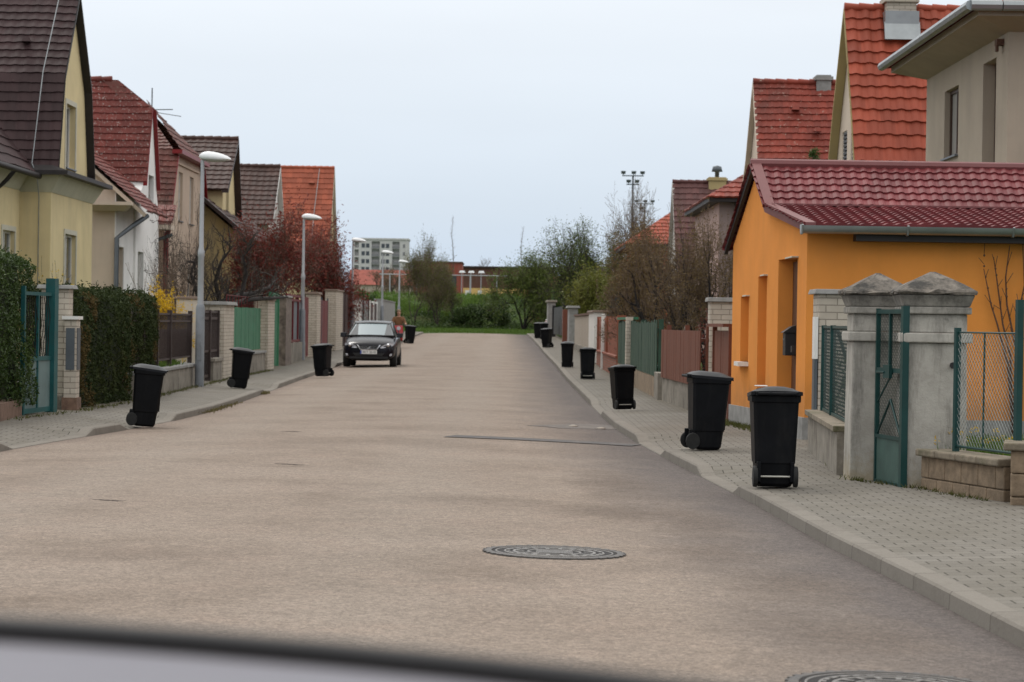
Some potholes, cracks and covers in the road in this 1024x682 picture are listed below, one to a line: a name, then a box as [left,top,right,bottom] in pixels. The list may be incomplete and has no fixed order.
manhole cover [483,545,626,560]
manhole cover [785,670,984,682]
